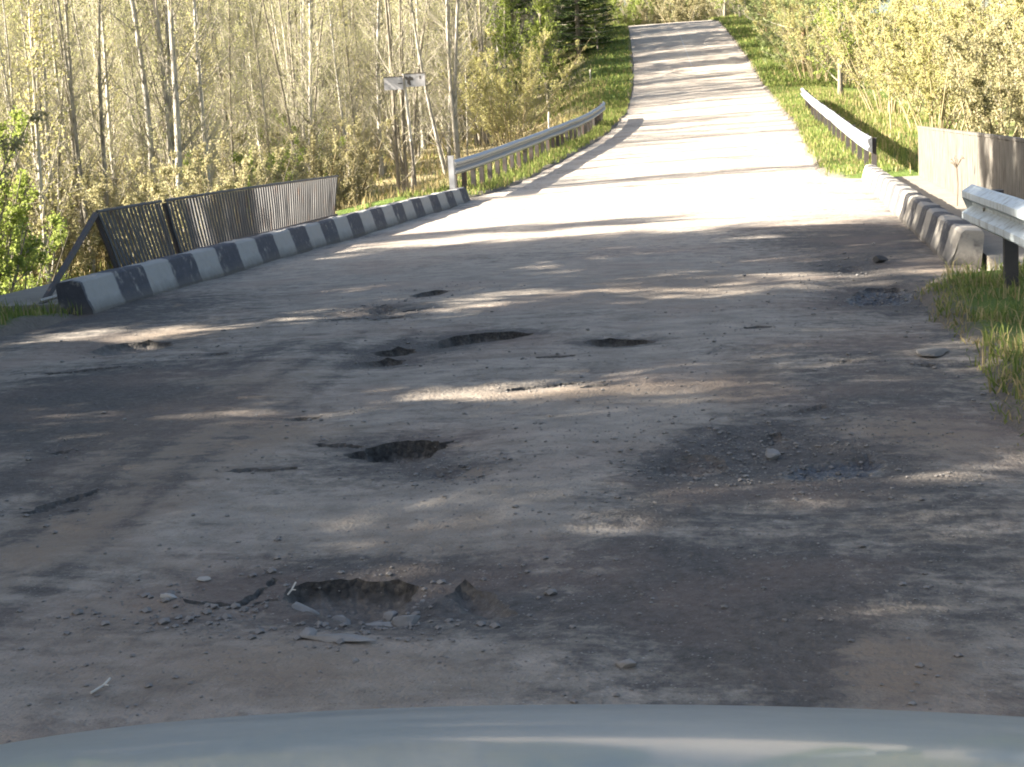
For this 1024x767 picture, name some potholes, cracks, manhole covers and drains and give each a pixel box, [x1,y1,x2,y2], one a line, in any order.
pothole [89,340,173,356]
pothole [343,440,454,465]
pothole [357,357,406,367]
pothole [443,579,518,621]
pothole [423,331,534,350]
pothole [371,346,416,357]
pothole [410,290,451,298]
pothole [844,288,913,306]
pothole [580,338,656,347]
pothole [779,454,887,481]
pothole [283,578,419,627]
